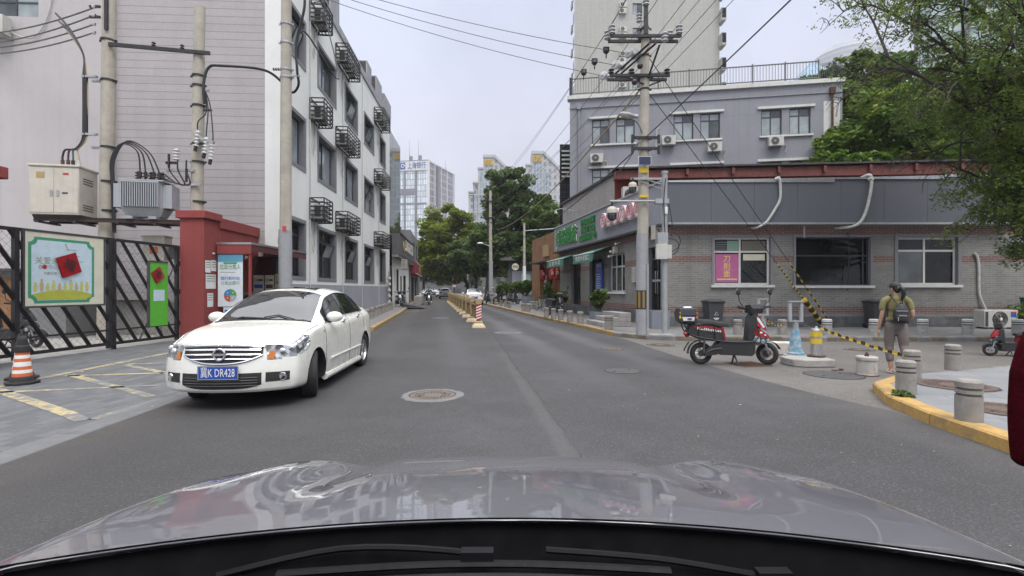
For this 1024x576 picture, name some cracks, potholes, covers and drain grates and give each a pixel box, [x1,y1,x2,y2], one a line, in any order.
manhole cover [917,379,1002,392]
manhole cover [802,370,866,380]
manhole cover [401,389,464,402]
manhole cover [984,402,1007,416]
